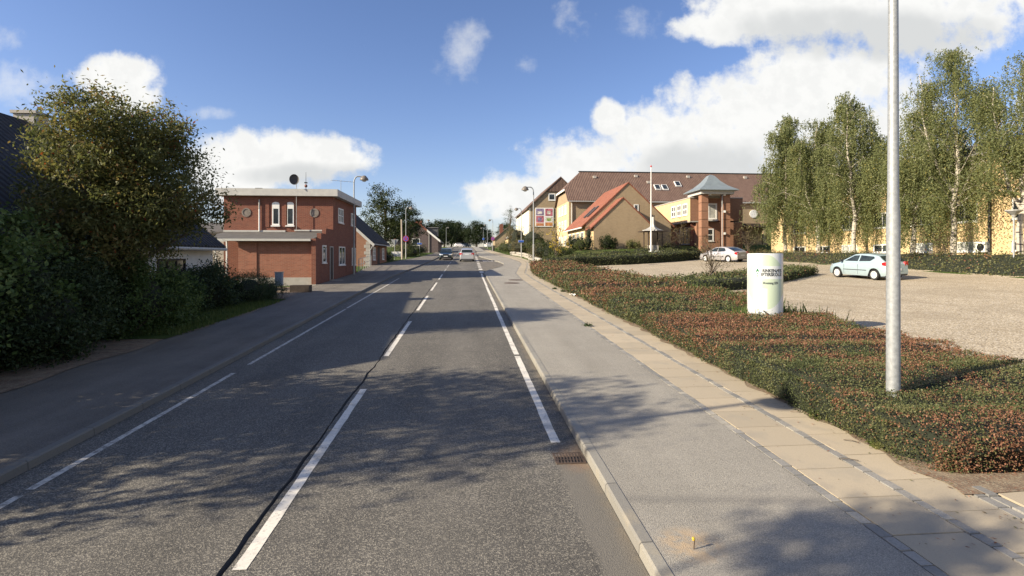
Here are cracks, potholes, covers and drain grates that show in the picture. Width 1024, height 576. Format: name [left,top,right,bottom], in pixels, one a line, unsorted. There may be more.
drain grate [552,452,586,465]
